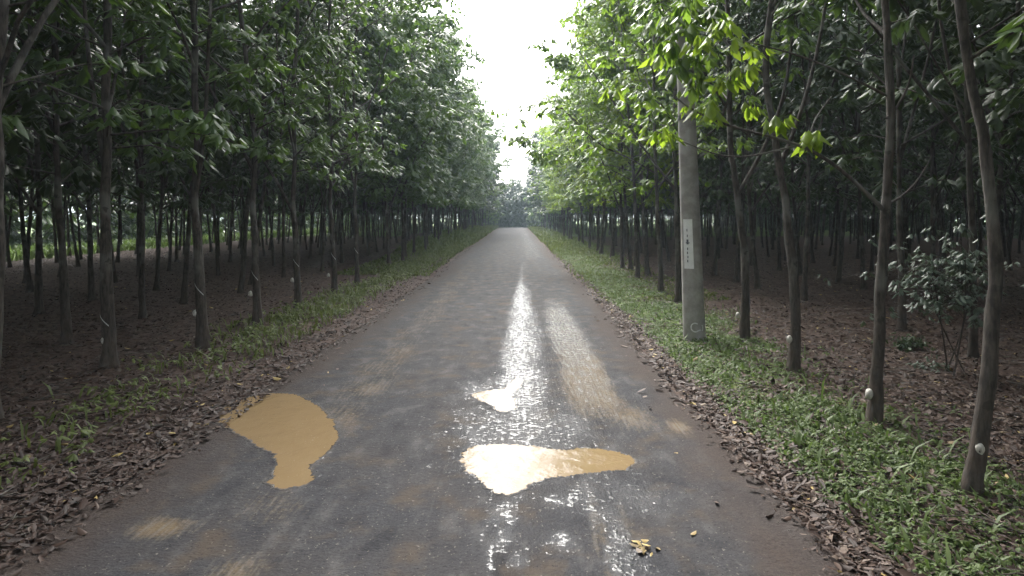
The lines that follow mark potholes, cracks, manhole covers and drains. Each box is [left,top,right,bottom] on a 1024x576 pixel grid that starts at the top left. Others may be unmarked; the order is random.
pothole [455,442,639,498]
pothole [468,376,526,413]
pothole [213,392,343,491]
